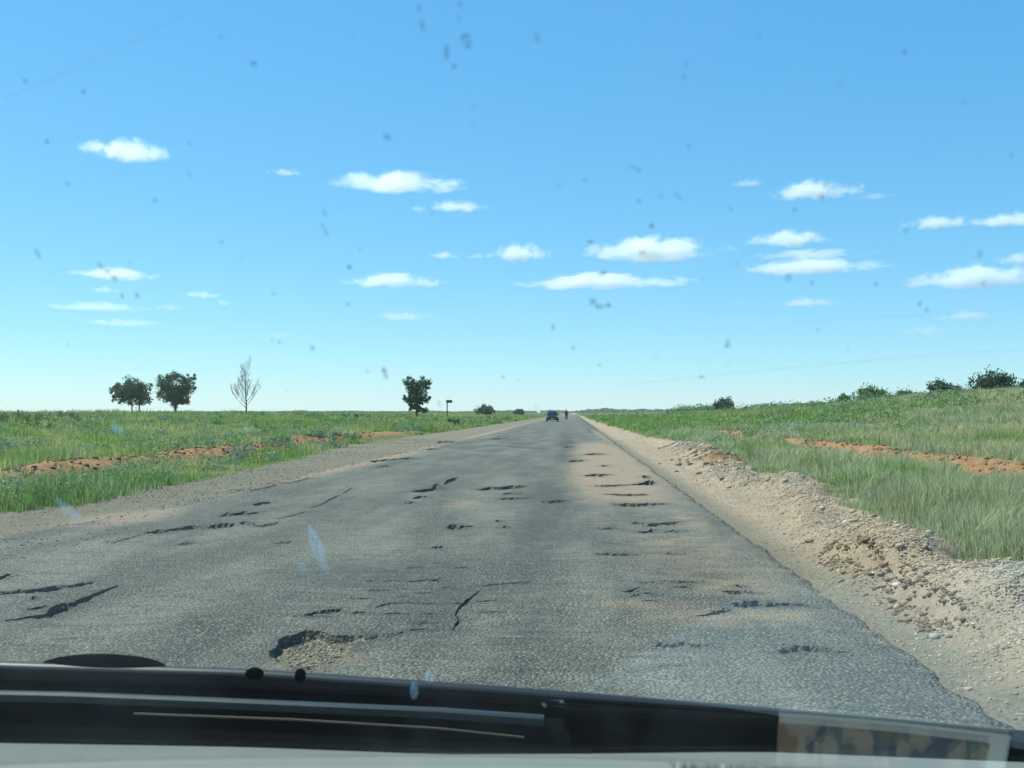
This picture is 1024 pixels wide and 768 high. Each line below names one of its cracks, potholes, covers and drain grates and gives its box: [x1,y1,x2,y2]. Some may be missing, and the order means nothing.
pothole [269,630,405,670]
crack [357,562,529,631]
crack [625,582,660,602]
crack [251,478,352,519]
